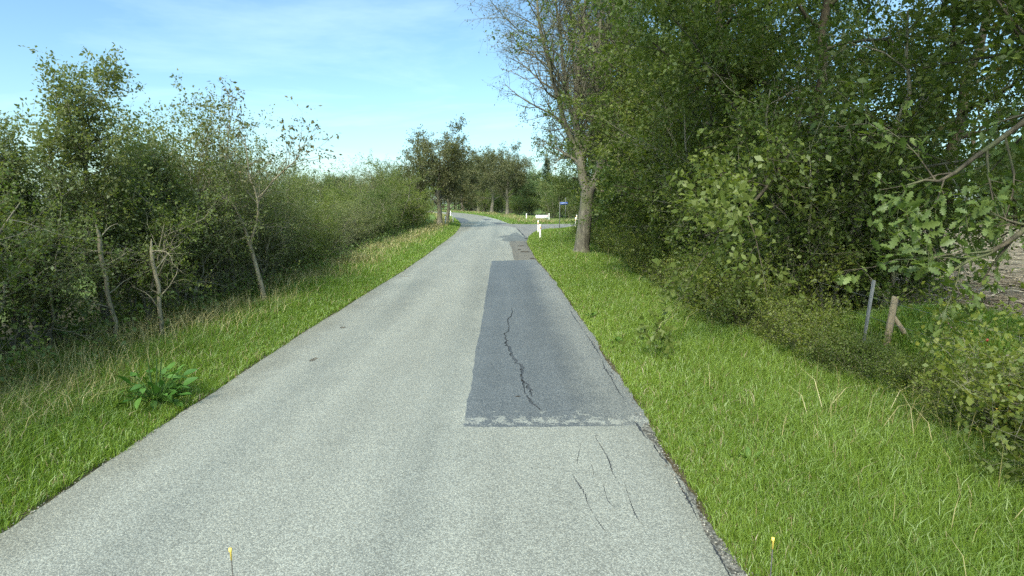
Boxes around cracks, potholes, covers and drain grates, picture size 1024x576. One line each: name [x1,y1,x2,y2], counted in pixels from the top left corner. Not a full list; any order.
crack [572,435,641,532]
crack [504,310,541,410]
